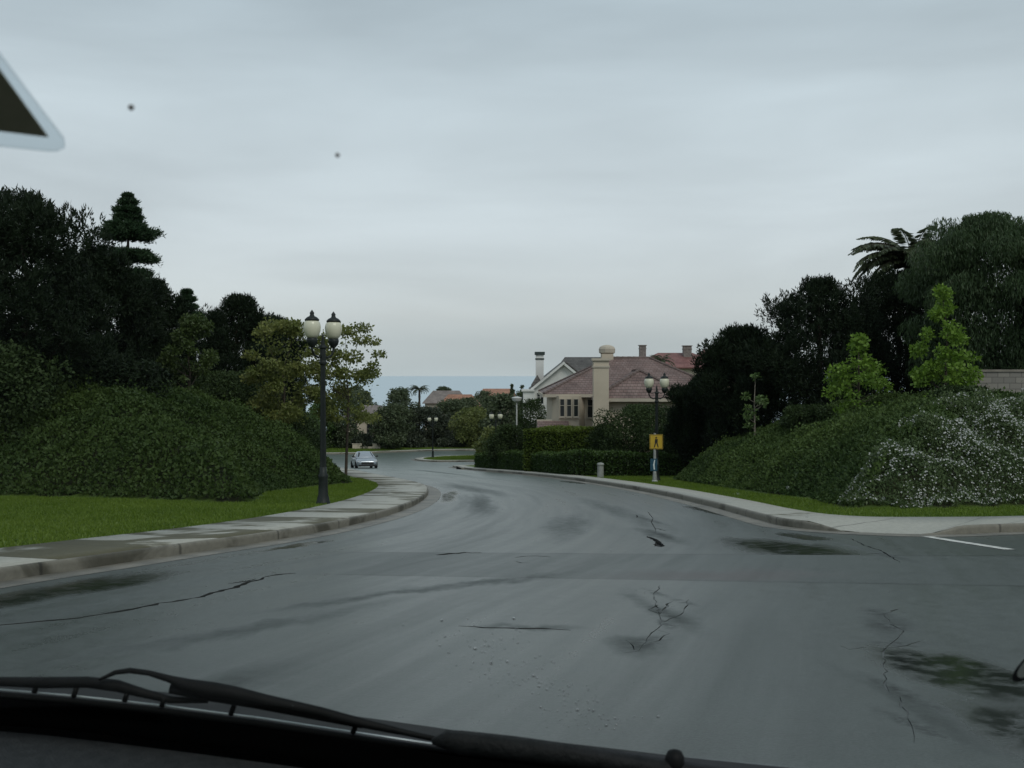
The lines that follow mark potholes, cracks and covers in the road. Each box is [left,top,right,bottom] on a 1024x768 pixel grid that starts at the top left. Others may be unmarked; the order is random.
crack [844,609,923,737]
crack [1,573,294,625]
crack [626,587,688,653]
